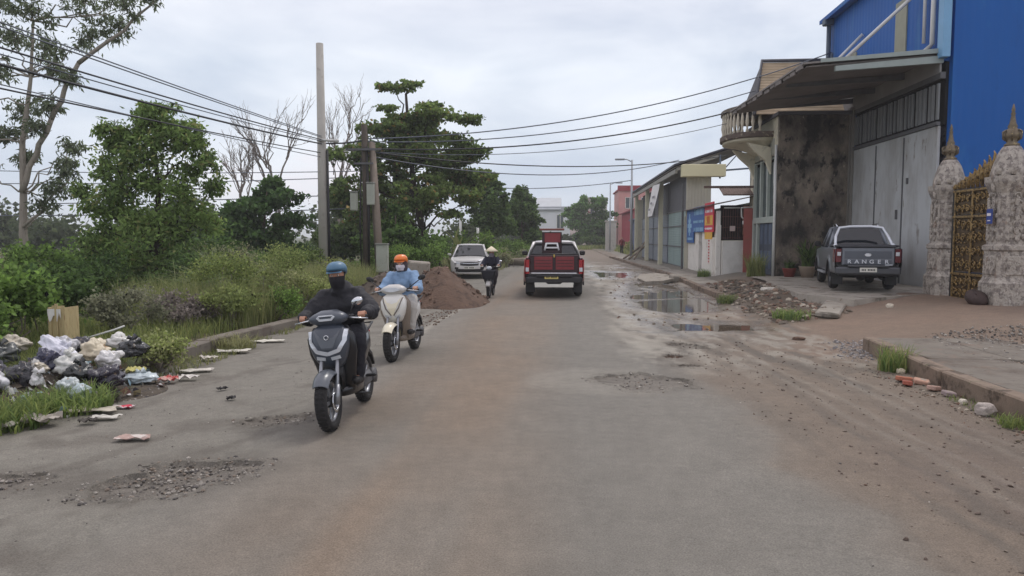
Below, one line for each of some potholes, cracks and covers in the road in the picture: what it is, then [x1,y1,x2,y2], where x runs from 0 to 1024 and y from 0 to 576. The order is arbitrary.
pothole [581,371,706,393]
pothole [61,455,282,506]
pothole [0,470,73,494]
pothole [231,412,316,429]
